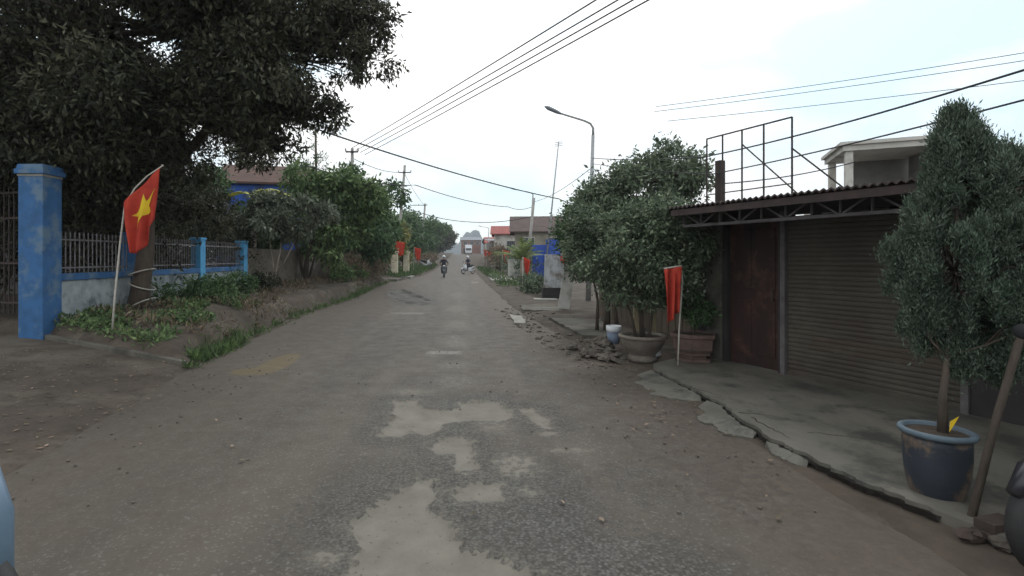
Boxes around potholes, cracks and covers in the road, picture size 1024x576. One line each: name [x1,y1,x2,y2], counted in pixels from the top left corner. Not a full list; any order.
pothole [518,406,558,430]
pothole [426,434,485,476]
pothole [375,397,519,438]
pothole [341,476,551,576]
